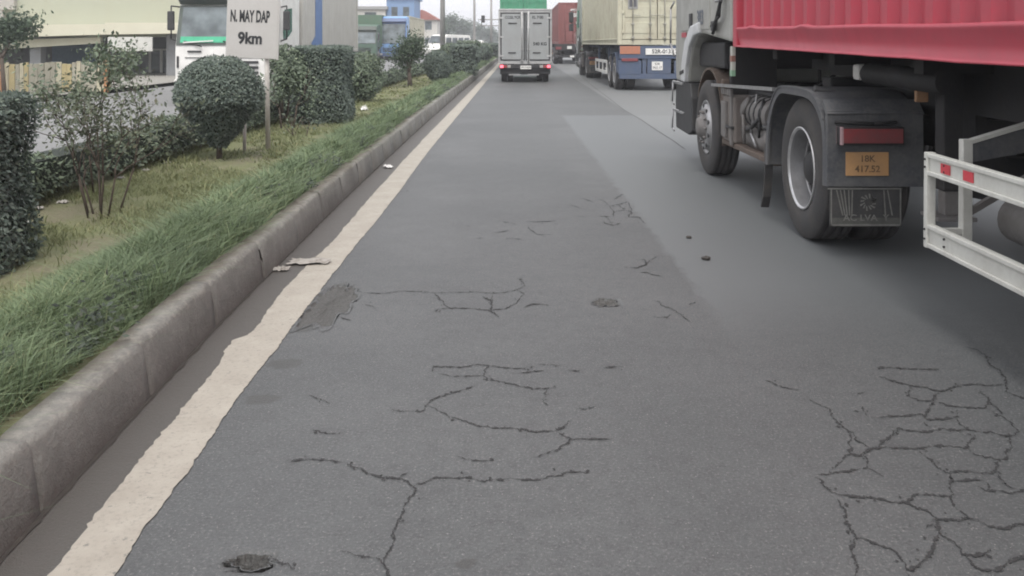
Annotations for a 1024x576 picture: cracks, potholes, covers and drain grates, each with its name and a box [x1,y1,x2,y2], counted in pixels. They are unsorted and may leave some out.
crack [359,278,549,317]
crack [765,348,1024,576]
crack [466,196,640,239]
pothole [221,552,275,573]
pothole [591,297,621,307]
crack [287,364,612,576]
